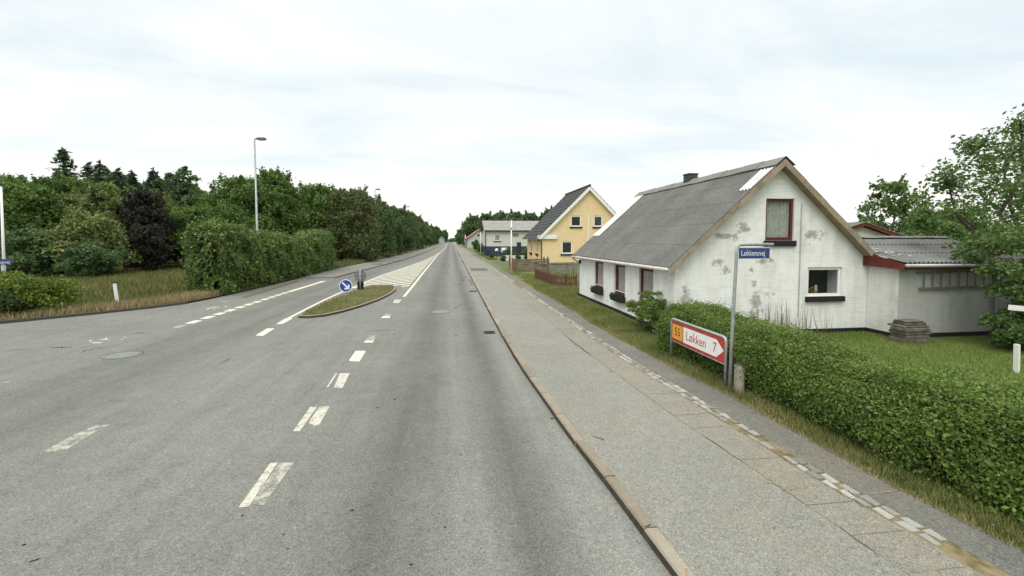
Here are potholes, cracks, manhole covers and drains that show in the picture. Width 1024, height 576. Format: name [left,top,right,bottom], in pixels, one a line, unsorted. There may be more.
manhole cover [101,351,144,359]
